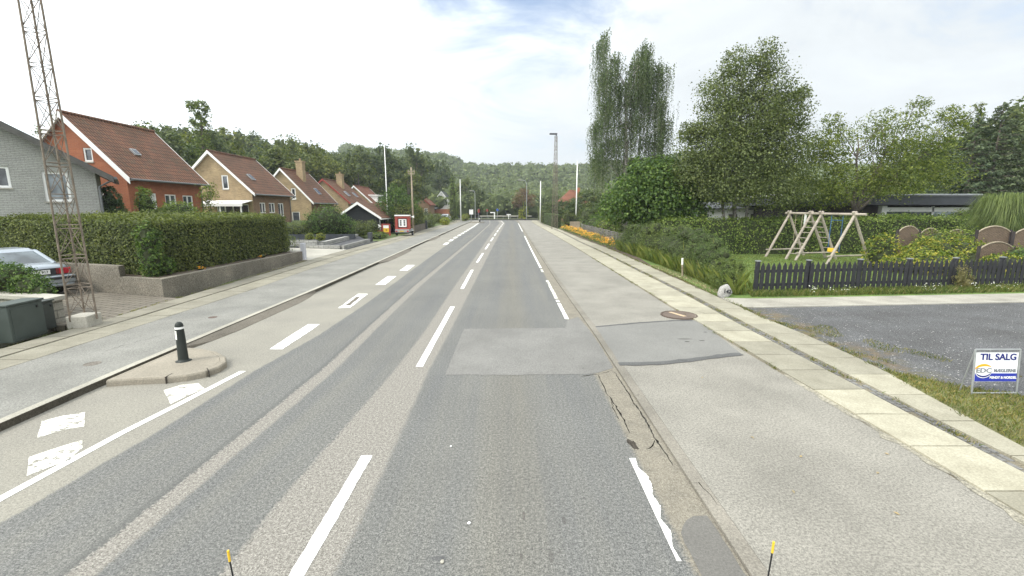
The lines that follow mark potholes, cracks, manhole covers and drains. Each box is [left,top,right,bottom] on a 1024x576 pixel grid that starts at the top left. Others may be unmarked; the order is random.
manhole cover [661,311,698,320]
